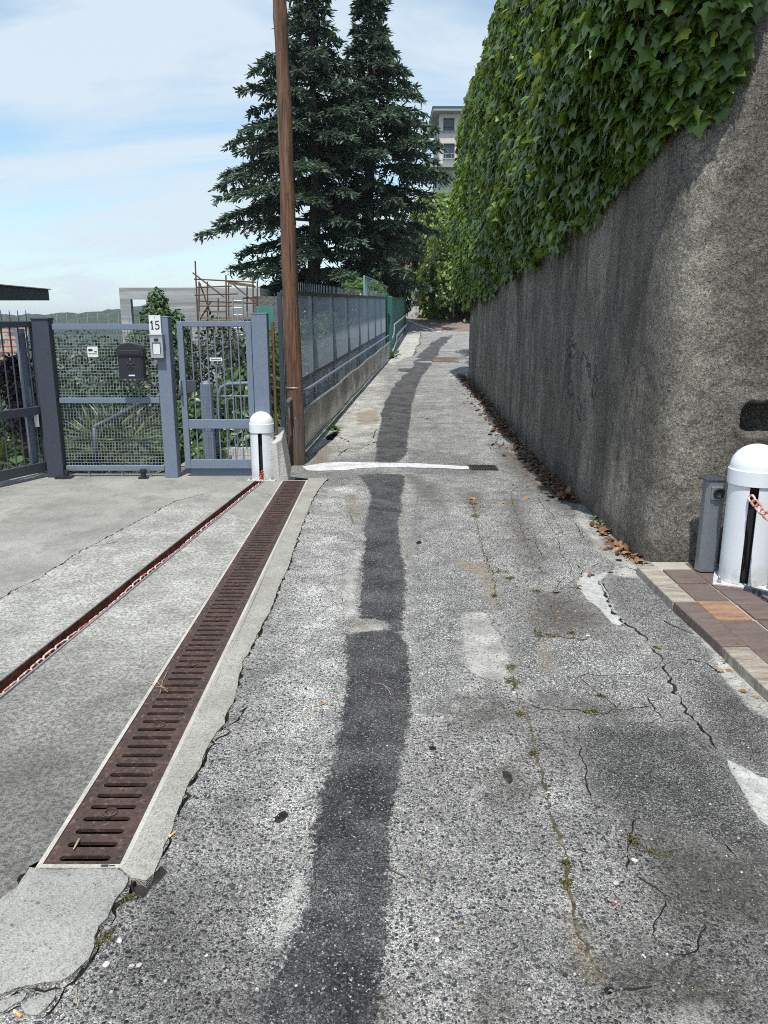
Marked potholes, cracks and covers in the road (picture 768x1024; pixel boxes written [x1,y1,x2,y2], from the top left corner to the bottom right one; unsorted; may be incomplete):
drain grate [109,689,205,760]
pothole [131,866,167,899]
crack [625,817,751,955]
drain grate [185,599,248,638]
crack [1,881,136,1019]
crack [499,487,720,807]
drain grate [210,568,263,599]
drain grate [267,493,300,507]
drain grate [276,481,306,493]
drain grate [244,524,285,544]
drain grate [257,507,293,524]
drain grate [229,544,275,569]
